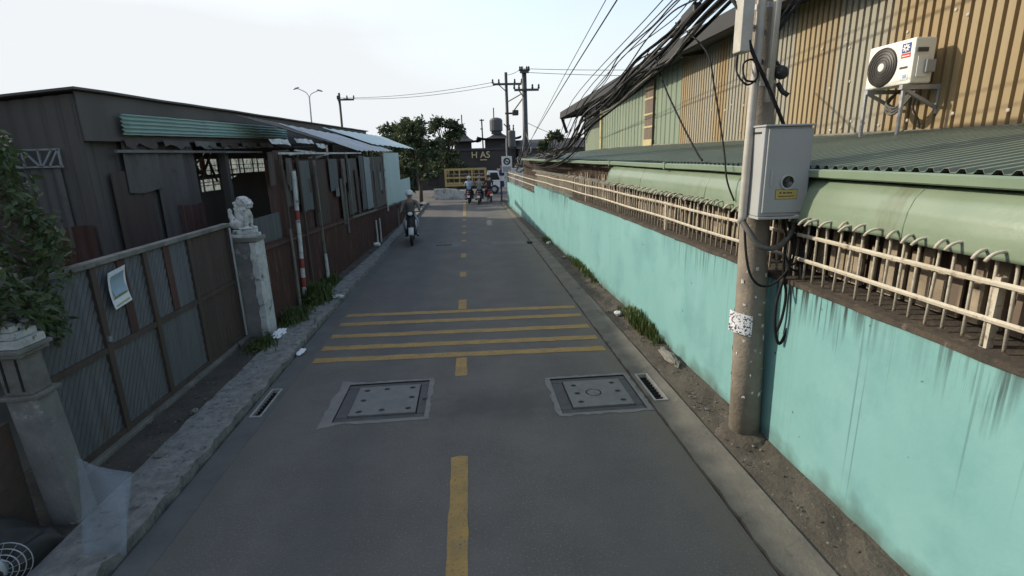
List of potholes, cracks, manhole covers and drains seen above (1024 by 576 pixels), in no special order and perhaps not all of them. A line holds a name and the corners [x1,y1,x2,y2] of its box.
drain grate [634,373,669,401]
drain grate [249,388,283,418]
manhole cover [316,378,435,430]
manhole cover [545,373,655,417]
